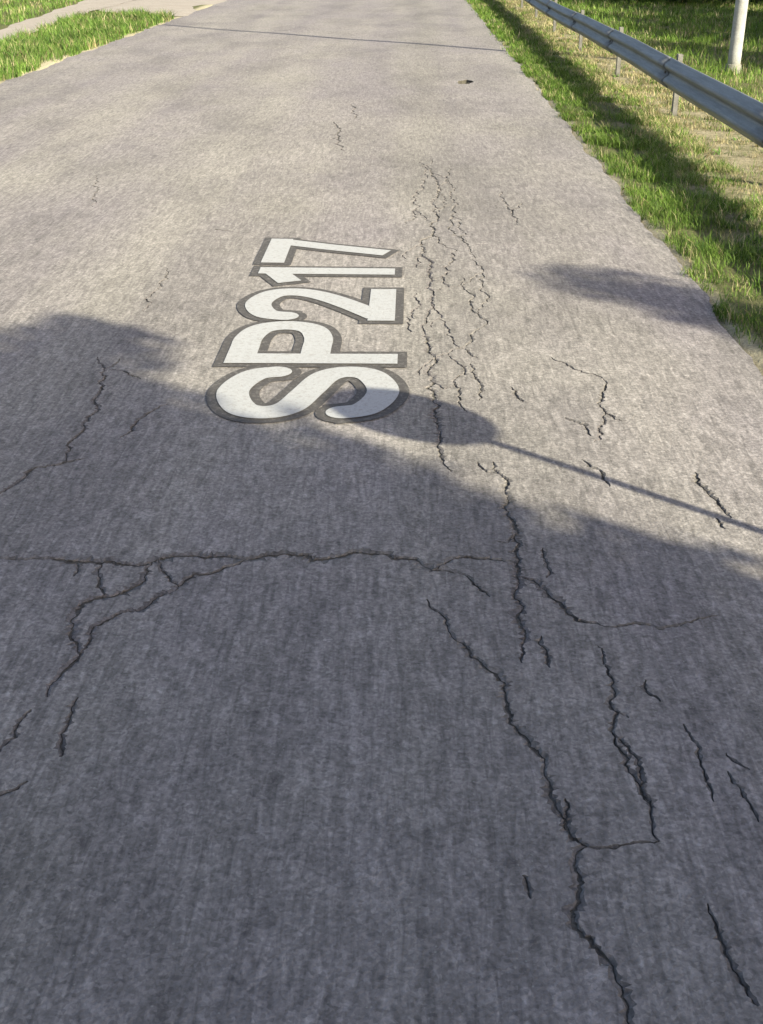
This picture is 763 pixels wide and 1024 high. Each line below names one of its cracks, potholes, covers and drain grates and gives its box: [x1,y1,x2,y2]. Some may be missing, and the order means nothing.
crack [0,158,717,1024]
crack [707,904,760,1006]
crack [331,104,358,151]
crack [683,724,759,822]
crack [691,472,732,529]
